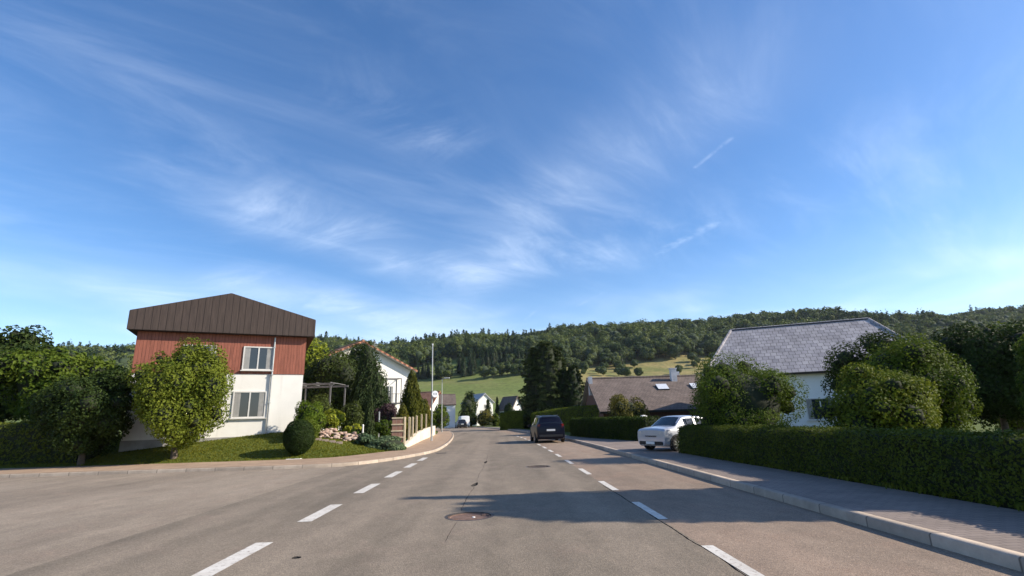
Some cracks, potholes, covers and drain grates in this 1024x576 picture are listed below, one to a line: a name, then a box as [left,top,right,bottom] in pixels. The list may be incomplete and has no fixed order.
manhole cover [444,511,494,521]
